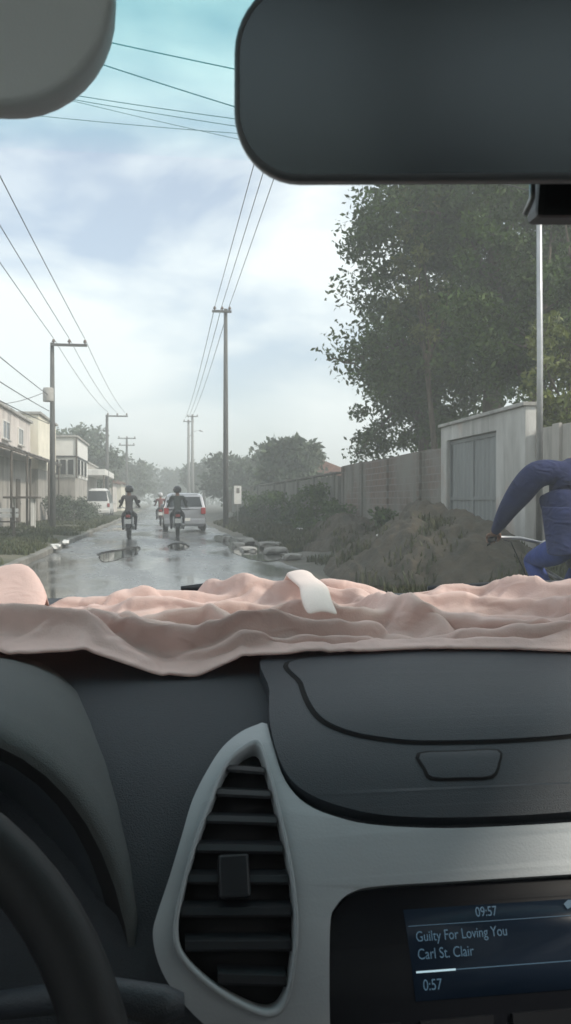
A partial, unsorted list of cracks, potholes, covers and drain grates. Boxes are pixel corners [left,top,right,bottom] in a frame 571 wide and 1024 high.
pothole [167,543,190,551]
pothole [97,546,141,562]
